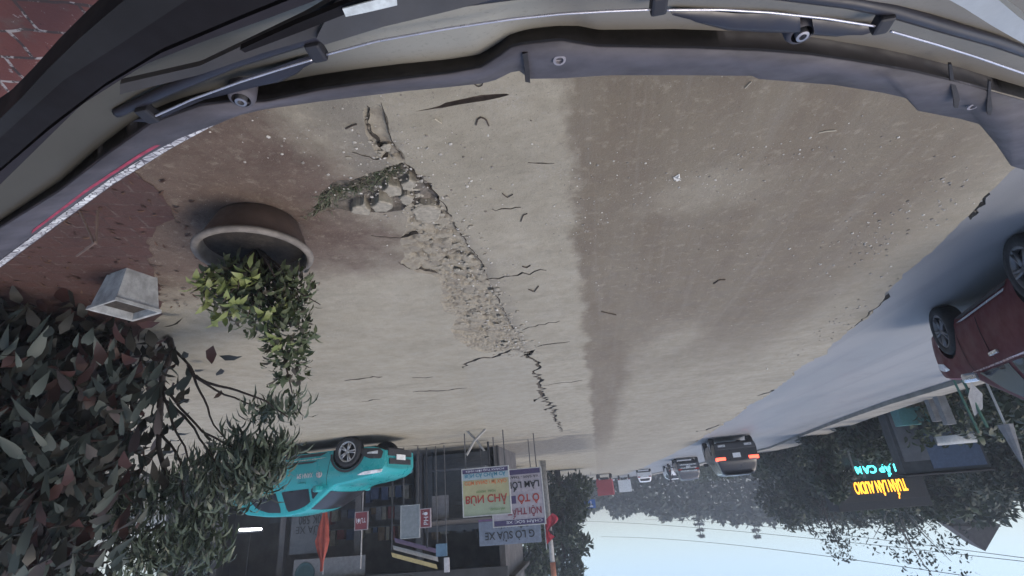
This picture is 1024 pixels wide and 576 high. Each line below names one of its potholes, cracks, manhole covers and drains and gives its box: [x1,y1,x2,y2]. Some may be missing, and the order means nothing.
pothole [309,163,440,219]
crack [363,104,581,431]
